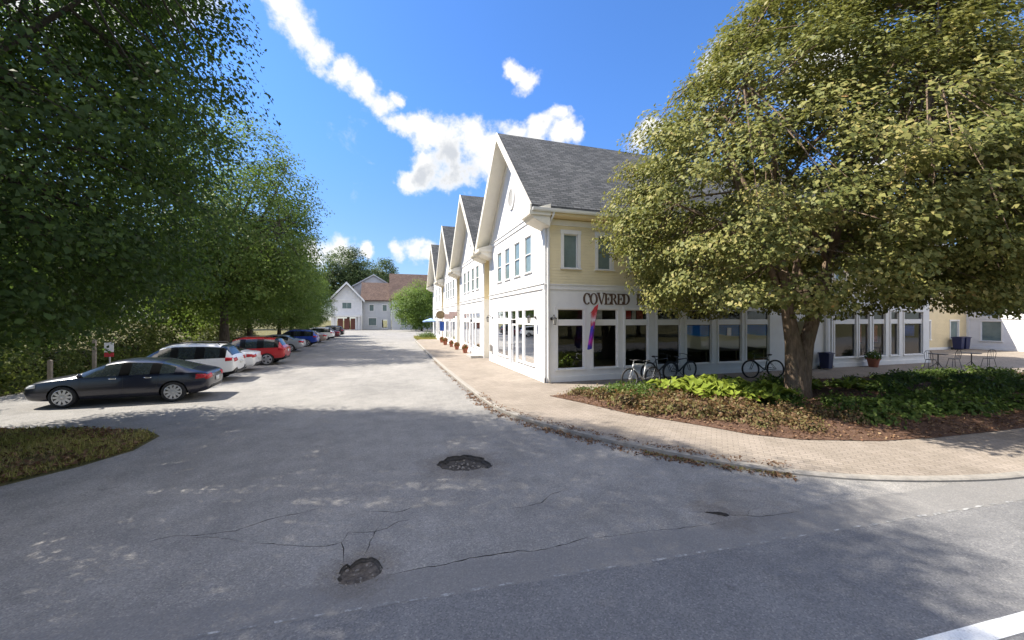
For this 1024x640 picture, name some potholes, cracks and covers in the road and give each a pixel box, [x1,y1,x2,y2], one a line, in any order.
crack [390,524,712,575]
pothole [332,553,388,588]
crack [261,502,424,561]
pothole [428,453,497,473]
